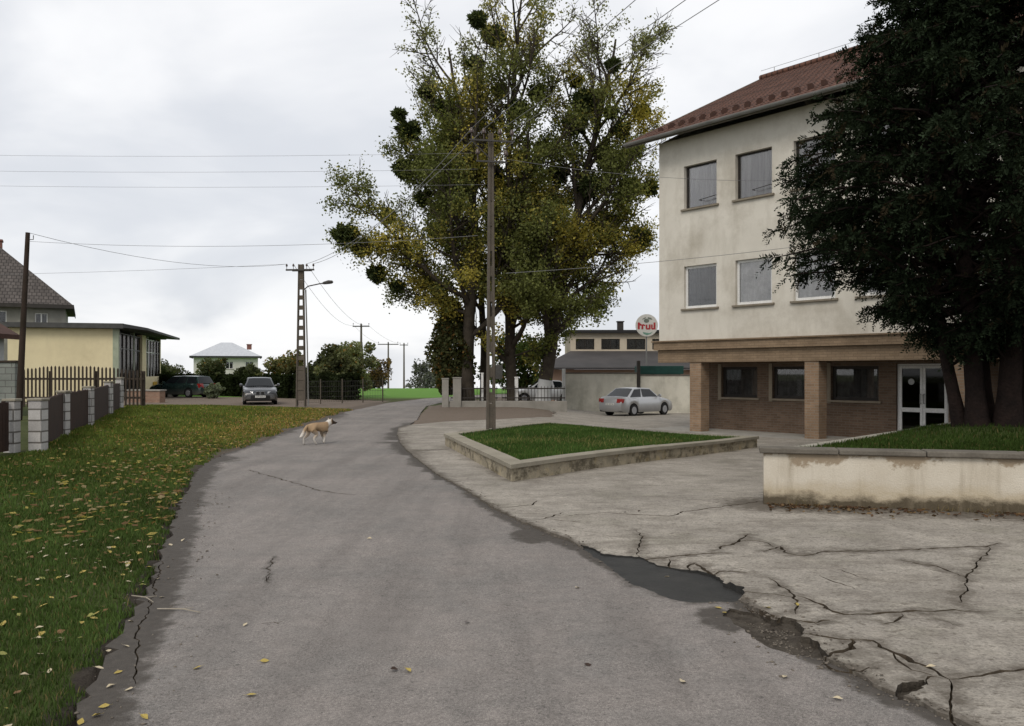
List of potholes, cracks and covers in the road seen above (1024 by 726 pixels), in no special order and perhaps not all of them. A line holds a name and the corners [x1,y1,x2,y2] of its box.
pothole [581,545,744,603]
crack [133,563,164,684]
crack [503,501,1024,726]
pothole [723,608,828,659]
